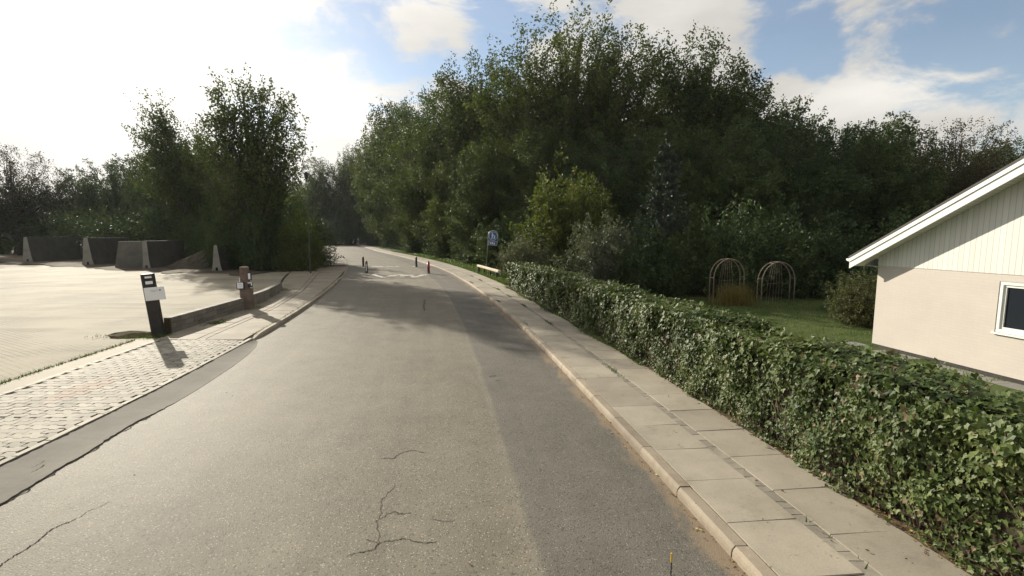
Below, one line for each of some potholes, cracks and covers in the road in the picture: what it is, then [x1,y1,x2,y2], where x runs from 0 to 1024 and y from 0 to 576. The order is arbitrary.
crack [0,504,104,566]
crack [350,484,437,555]
